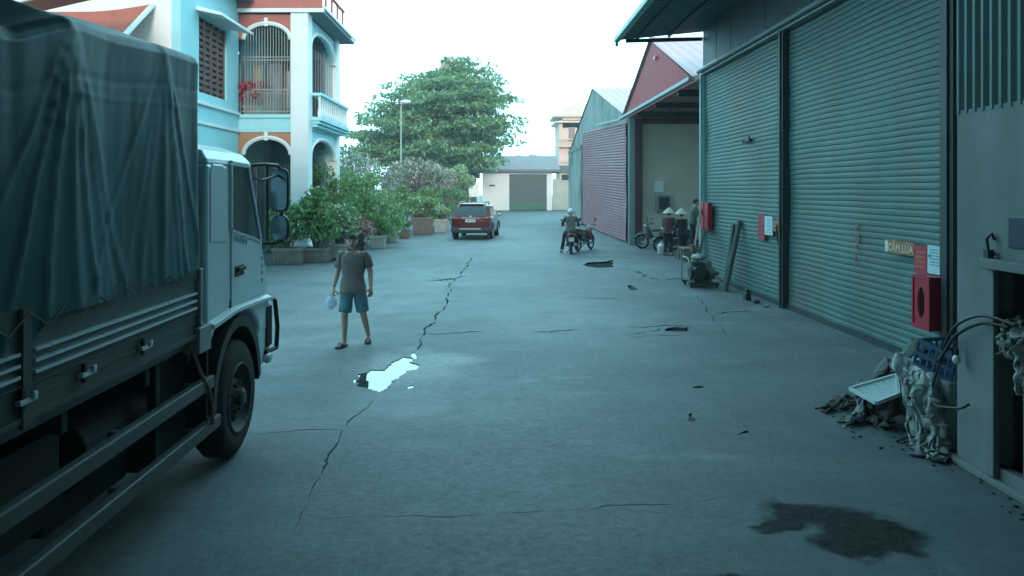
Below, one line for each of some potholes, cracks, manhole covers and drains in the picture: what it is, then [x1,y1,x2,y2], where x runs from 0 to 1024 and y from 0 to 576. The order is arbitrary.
crack [330,490,760,519]
crack [629,296,750,338]
crack [264,400,373,530]
crack [417,258,480,350]
pothole [357,357,419,392]
pothole [584,260,614,268]
